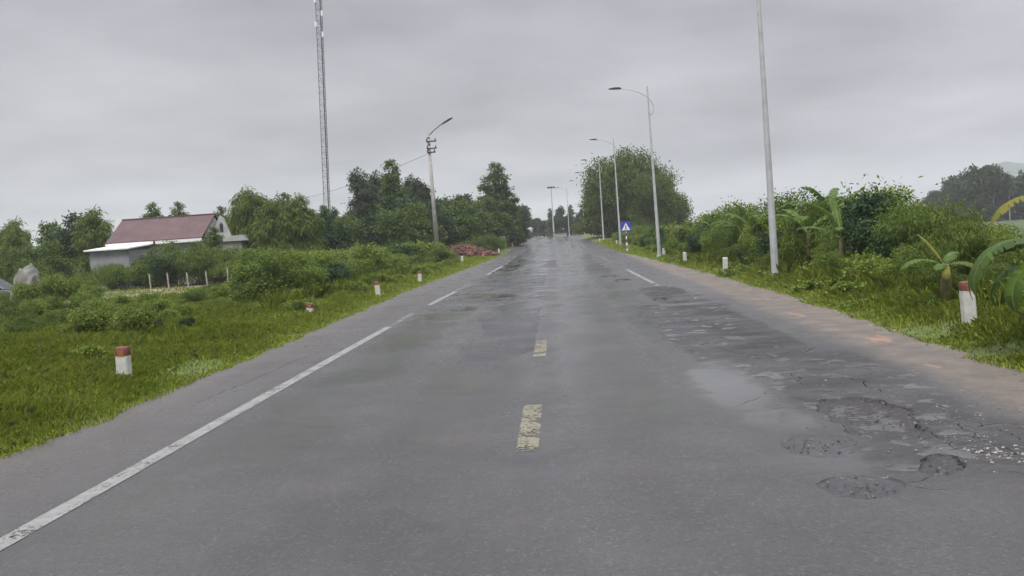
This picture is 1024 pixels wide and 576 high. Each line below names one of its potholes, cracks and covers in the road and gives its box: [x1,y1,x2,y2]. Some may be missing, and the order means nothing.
pothole [918,453,966,476]
crack [900,414,1023,474]
pothole [815,475,906,499]
pothole [780,434,860,458]
pothole [811,397,925,442]
